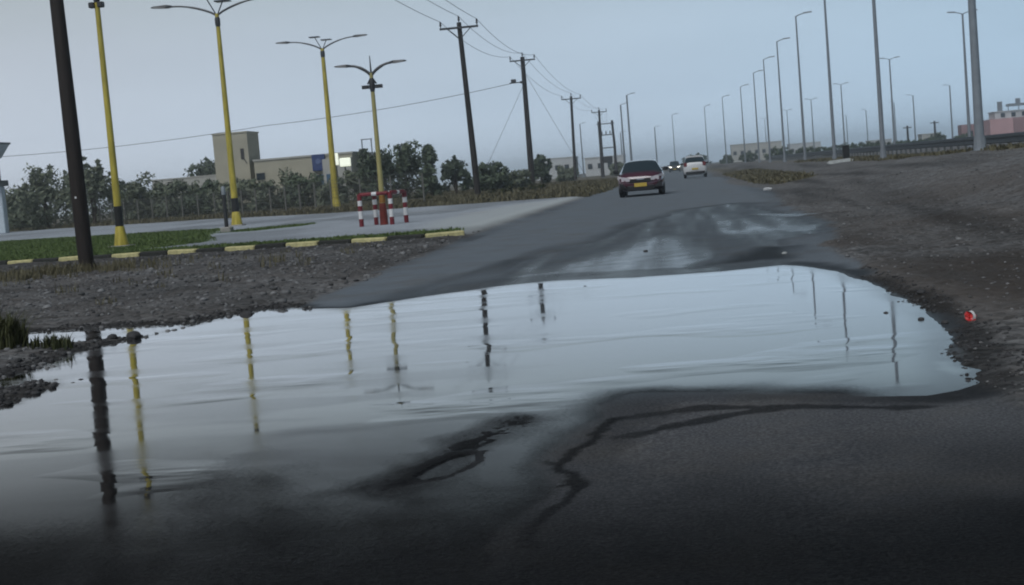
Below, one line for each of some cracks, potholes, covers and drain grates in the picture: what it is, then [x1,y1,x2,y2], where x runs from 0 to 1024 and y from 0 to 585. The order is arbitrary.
pothole [412,453,476,481]
pothole [0,264,990,423]
crack [511,417,622,585]
